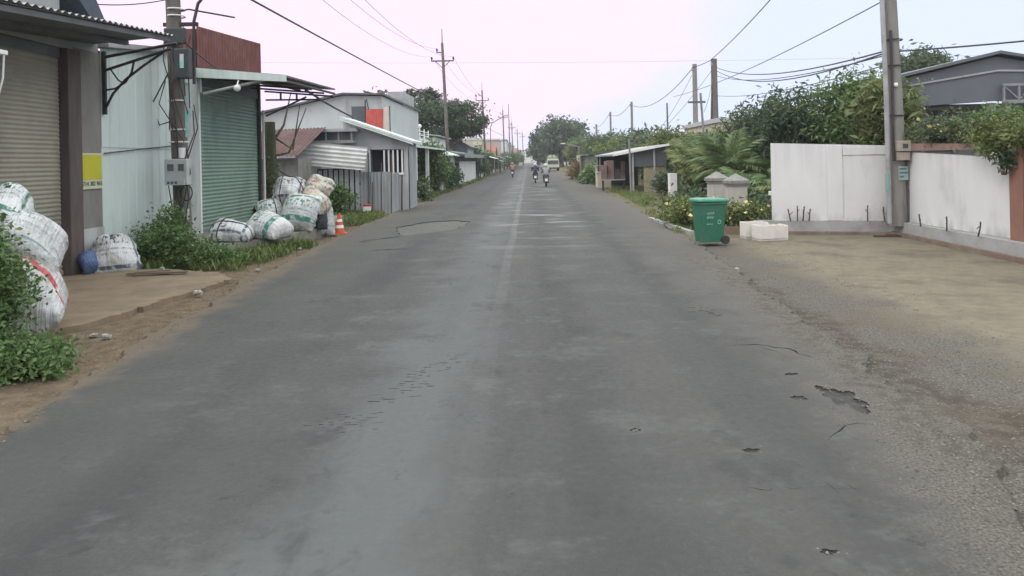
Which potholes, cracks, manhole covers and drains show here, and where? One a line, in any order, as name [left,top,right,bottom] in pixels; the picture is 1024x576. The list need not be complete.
crack [694,307,810,357]
pothole [815,385,871,414]
